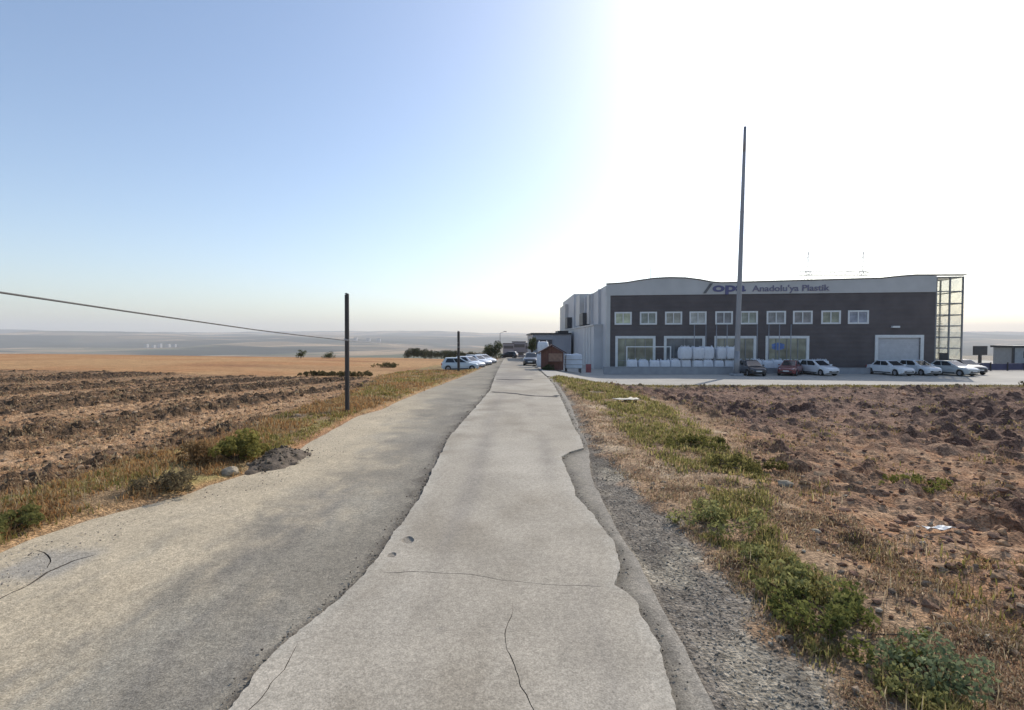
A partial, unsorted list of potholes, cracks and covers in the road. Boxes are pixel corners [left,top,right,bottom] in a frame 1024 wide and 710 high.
crack [494,379,558,397]
crack [249,643,298,710]
crack [0,550,93,599]
crack [505,612,534,710]
